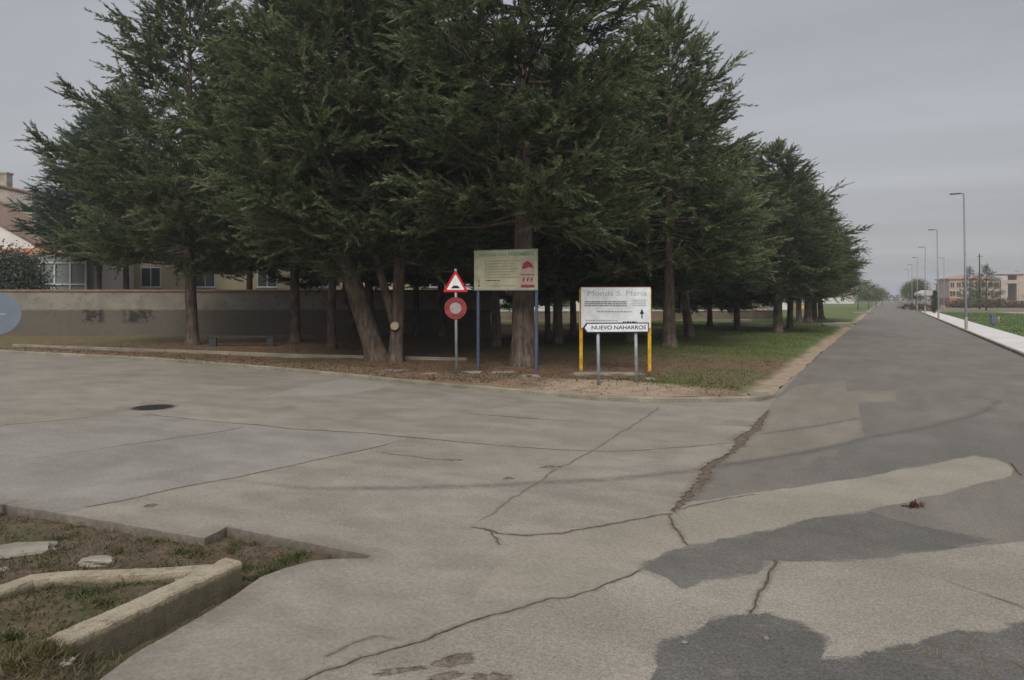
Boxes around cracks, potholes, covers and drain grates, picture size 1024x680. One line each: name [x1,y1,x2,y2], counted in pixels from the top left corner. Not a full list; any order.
crack [88,411,769,545]
crack [749,560,777,614]
crack [305,570,641,680]
